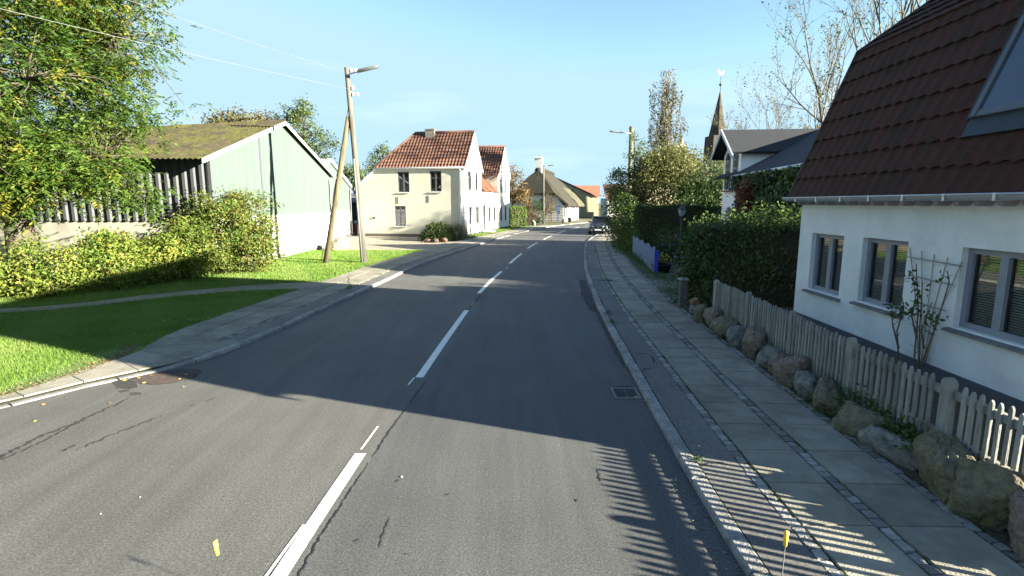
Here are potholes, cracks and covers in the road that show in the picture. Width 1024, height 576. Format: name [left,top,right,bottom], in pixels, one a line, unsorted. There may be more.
crack [298,380,427,576]
drain grate [610,387,642,399]
crack [0,397,161,460]
